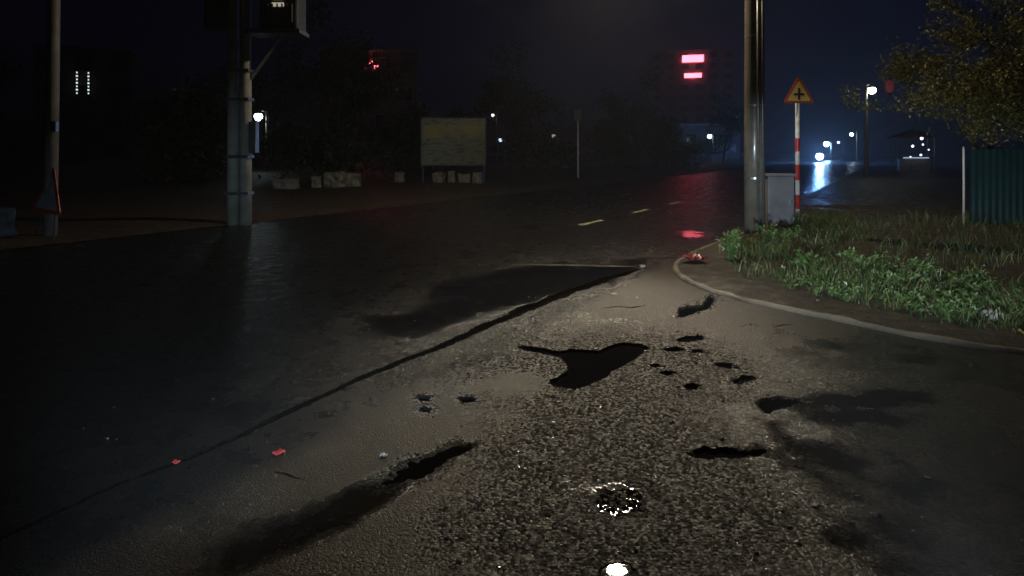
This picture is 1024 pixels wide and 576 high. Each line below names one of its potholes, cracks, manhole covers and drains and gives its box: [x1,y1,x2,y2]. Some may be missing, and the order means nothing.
pothole [755,396,814,414]
pothole [378,441,479,486]
pothole [587,483,649,518]
pothole [732,375,759,385]
pothole [597,561,636,576]
pothole [519,342,650,390]
pothole [685,446,768,460]
pothole [677,294,716,318]
